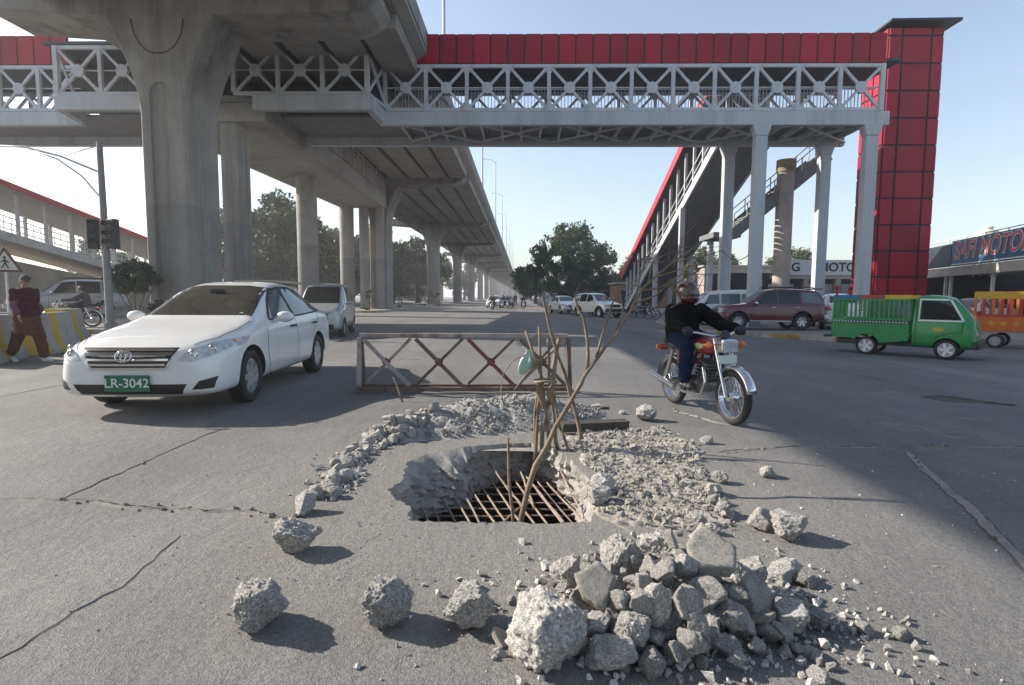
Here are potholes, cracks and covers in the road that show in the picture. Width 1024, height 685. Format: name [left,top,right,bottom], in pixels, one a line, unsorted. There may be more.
crack [673,408,729,425]
crack [0,536,180,659]
crack [1,497,298,518]
pothole [388,443,595,524]
